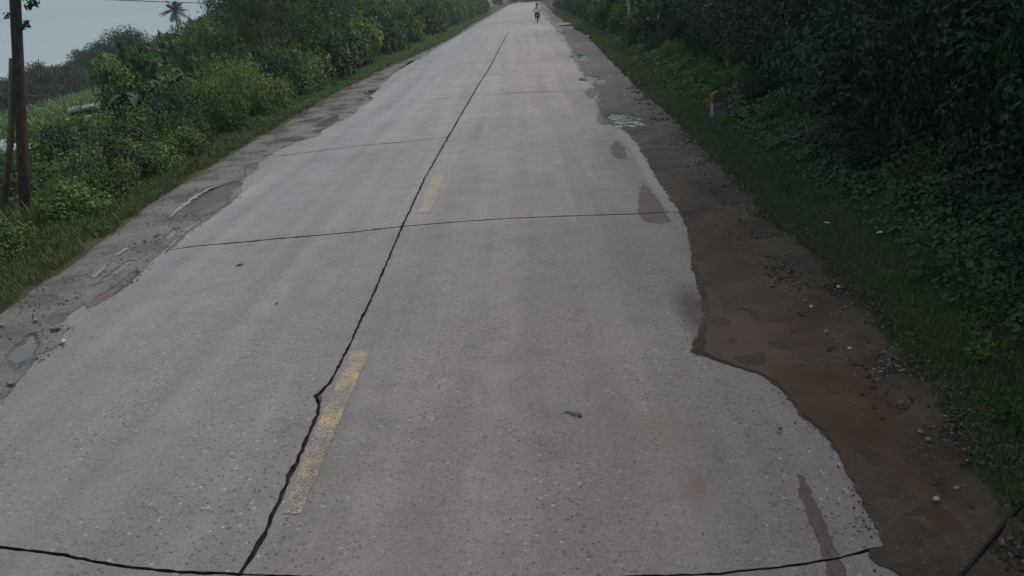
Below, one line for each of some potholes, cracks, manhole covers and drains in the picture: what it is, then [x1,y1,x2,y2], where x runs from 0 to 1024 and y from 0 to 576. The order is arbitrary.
crack [238,30,510,576]
pothole [180,181,242,213]
pothole [4,333,41,371]
pothole [579,76,606,85]
pothole [606,111,645,128]
